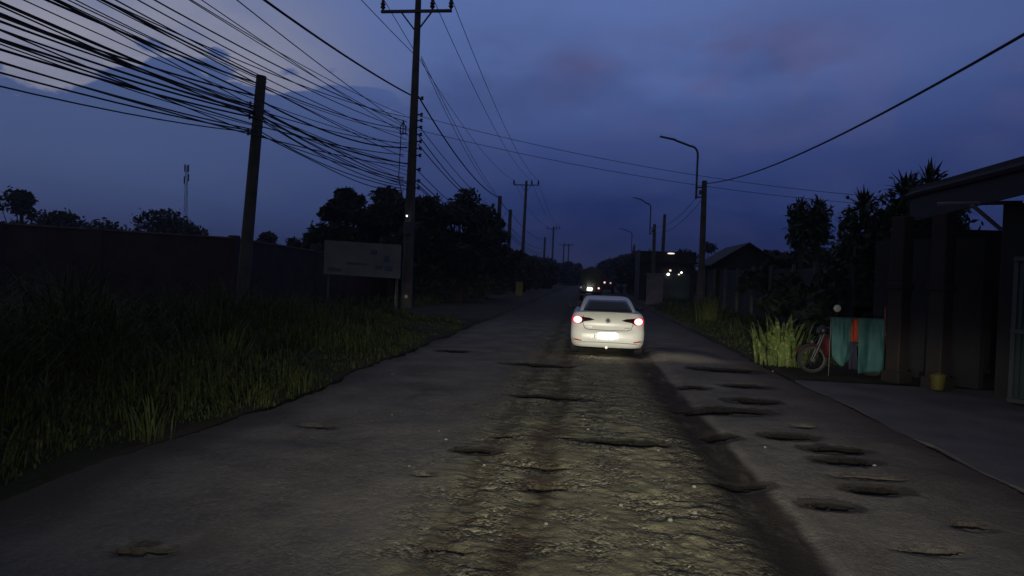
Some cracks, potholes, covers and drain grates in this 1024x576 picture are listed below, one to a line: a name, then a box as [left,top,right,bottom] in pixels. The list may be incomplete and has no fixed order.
pothole [582,439,672,448]
pothole [103,545,175,558]
pothole [522,484,565,493]
pothole [946,521,995,532]
pothole [811,458,872,467]
pothole [711,482,770,493]
pothole [887,547,973,558]
pothole [843,487,900,496]
pothole [804,502,856,512]
pothole [695,434,739,444]
pothole [800,446,865,455]
